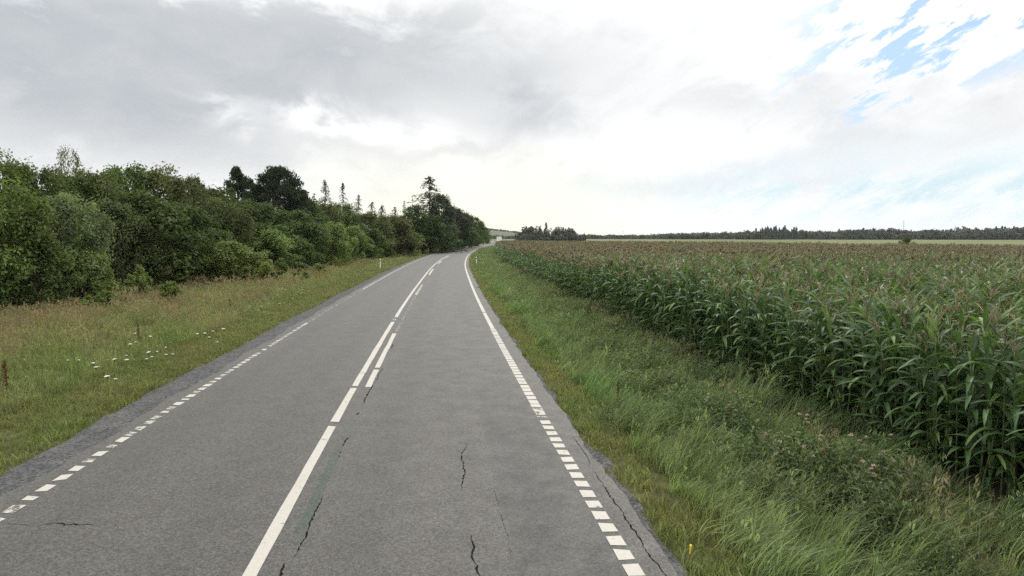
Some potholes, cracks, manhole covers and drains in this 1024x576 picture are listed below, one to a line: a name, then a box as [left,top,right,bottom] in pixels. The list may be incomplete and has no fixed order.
crack [279,496,323,576]
crack [470,535,480,576]
crack [458,445,467,489]
crack [573,437,667,576]
